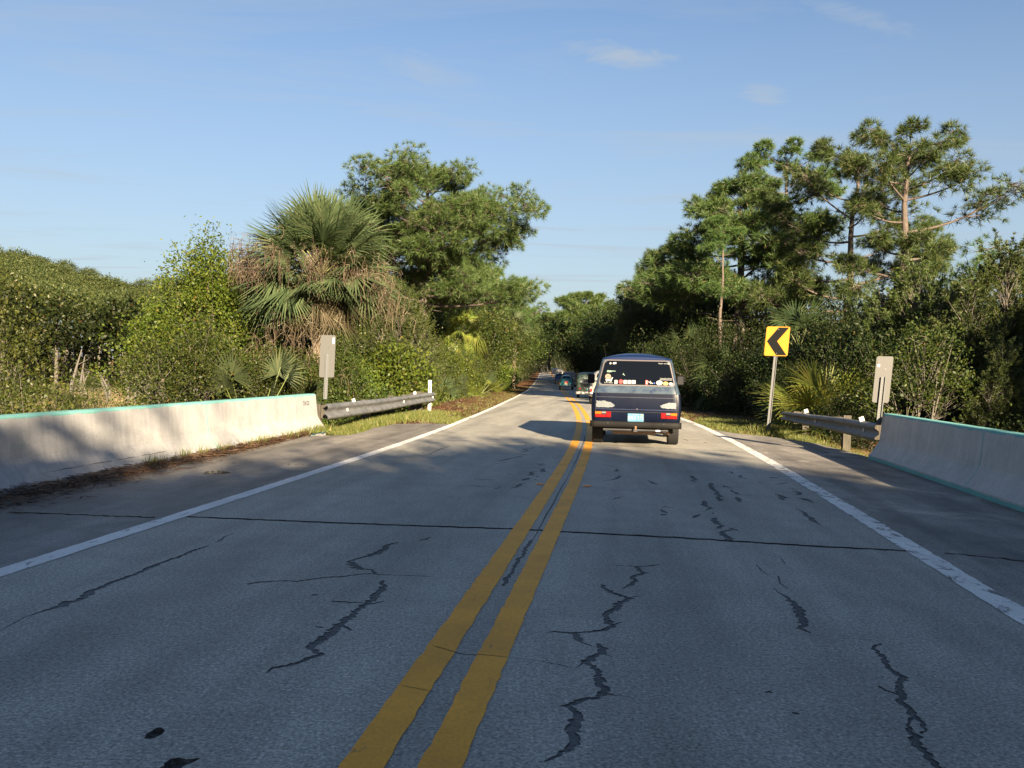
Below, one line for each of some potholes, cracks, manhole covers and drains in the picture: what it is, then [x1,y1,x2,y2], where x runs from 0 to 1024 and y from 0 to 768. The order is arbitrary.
crack [849,637,942,768]
crack [455,564,660,762]
crack [756,558,811,633]
pothole [144,727,165,739]
crack [470,425,658,586]
pothole [160,757,200,768]
crack [247,542,414,673]
crack [690,472,820,541]
crack [0,533,233,631]
